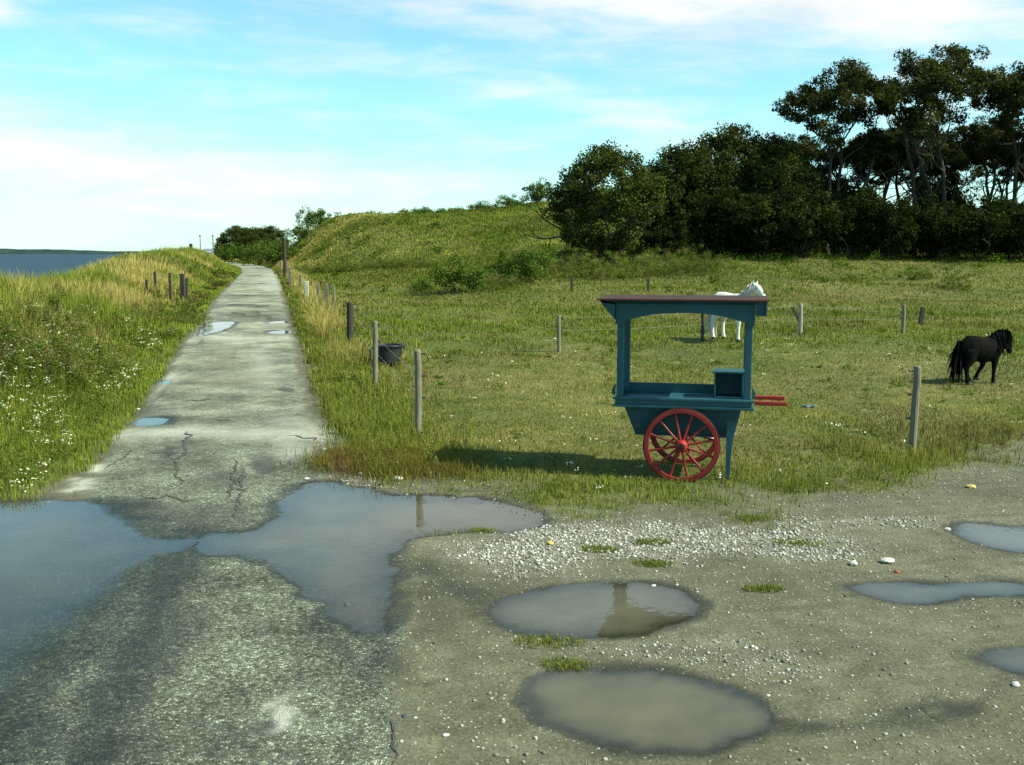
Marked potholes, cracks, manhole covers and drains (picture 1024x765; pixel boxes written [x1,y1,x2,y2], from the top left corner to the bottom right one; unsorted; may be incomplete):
crack [390,717,398,765]
crack [142,431,197,501]
pothole [129,415,183,427]
pothole [472,578,722,645]
crack [226,458,247,519]
pothole [192,320,241,337]
